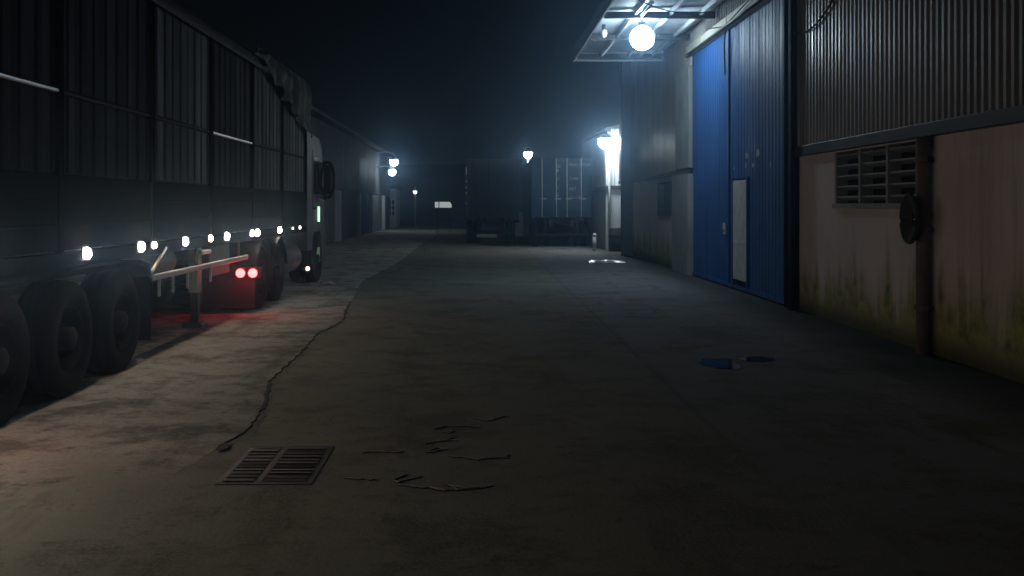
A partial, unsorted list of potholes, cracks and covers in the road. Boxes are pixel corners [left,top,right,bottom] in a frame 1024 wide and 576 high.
crack [344,415,510,492]
drain grate [215,446,335,485]
crack [216,302,405,453]
